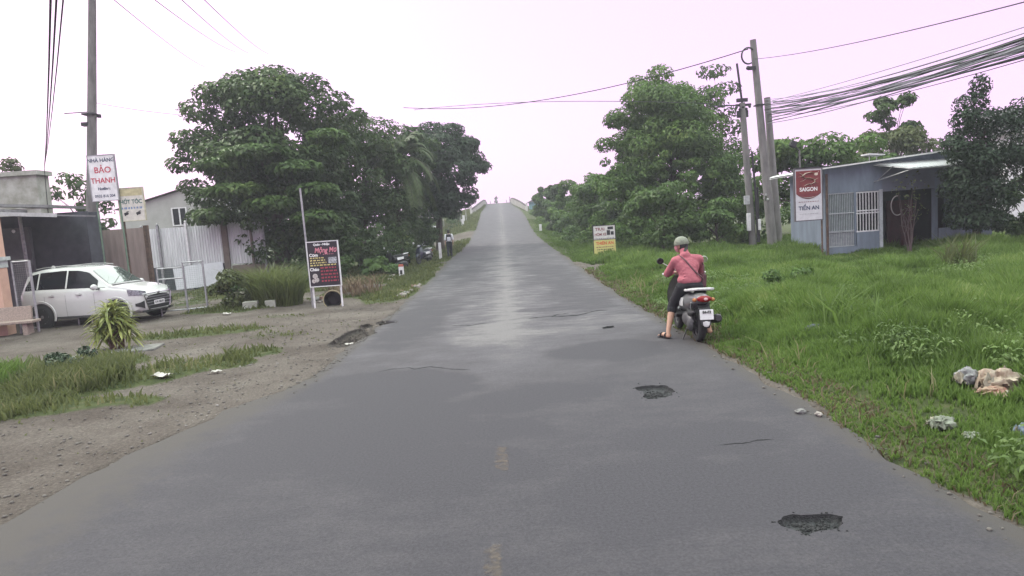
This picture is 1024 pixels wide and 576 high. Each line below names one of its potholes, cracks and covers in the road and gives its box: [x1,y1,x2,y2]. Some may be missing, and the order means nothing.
pothole [633,383,679,399]
pothole [771,512,848,536]
pothole [327,328,370,350]
